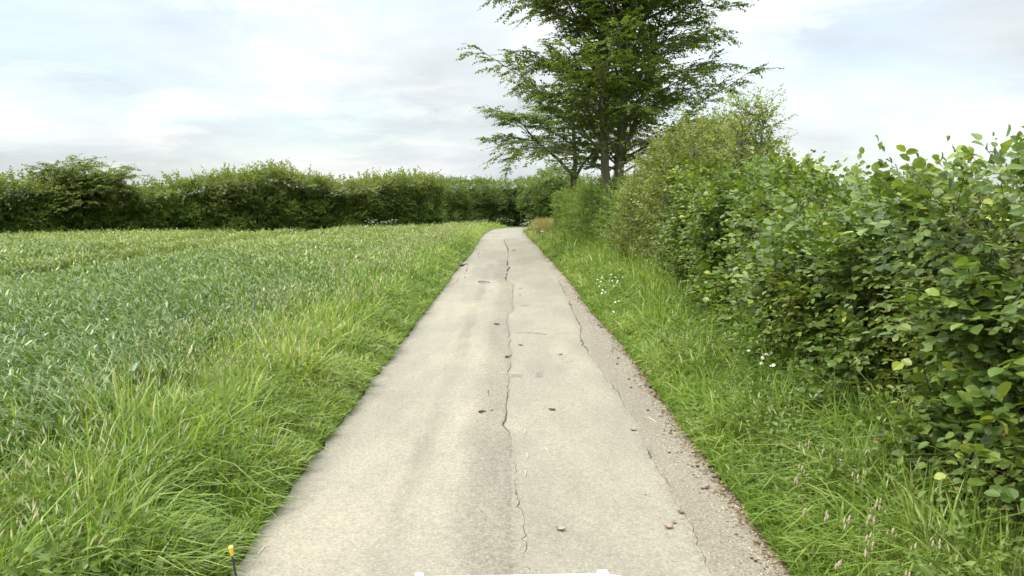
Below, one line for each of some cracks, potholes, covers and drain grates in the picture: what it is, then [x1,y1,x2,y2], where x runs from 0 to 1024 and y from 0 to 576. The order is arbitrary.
crack [558,280,626,408]
crack [642,444,712,574]
